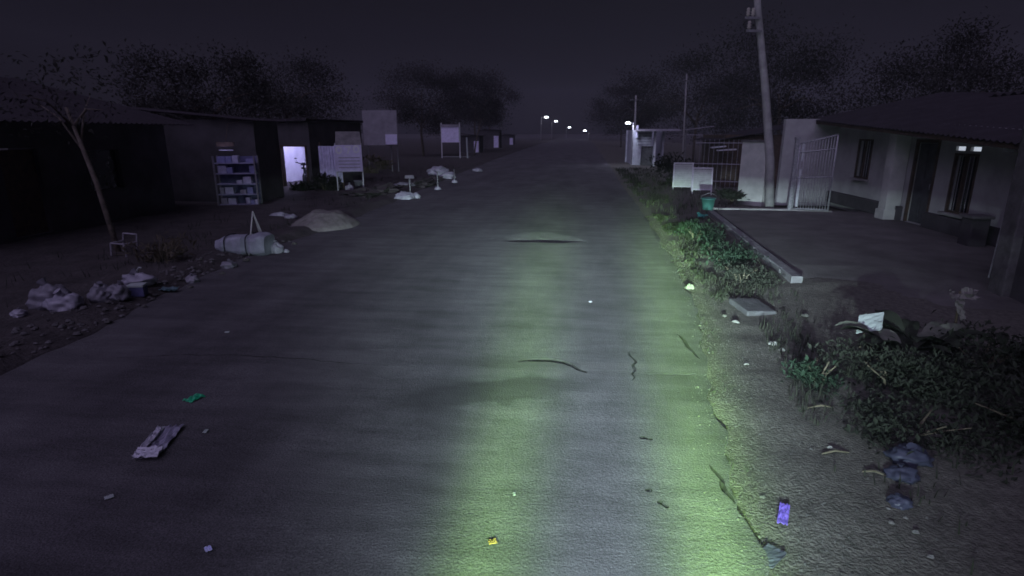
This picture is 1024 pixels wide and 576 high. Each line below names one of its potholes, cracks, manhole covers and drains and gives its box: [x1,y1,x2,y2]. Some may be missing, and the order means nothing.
crack [677,334,702,360]
pothole [492,231,587,243]
crack [628,351,637,381]
crack [709,465,736,504]
